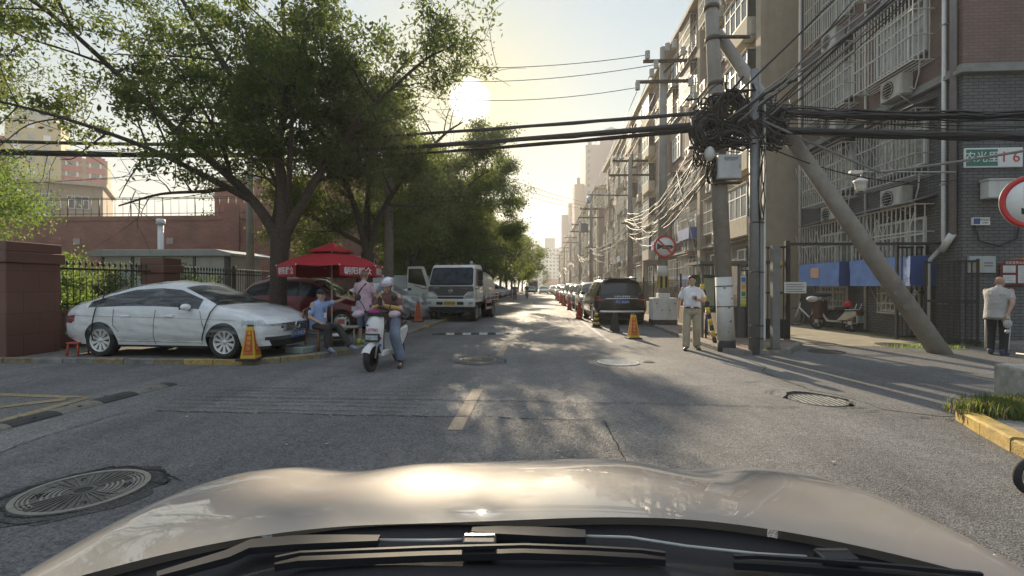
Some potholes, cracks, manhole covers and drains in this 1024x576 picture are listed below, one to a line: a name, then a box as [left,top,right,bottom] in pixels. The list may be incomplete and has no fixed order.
manhole cover [451,356,503,364]
manhole cover [0,466,168,527]
manhole cover [782,391,857,407]
